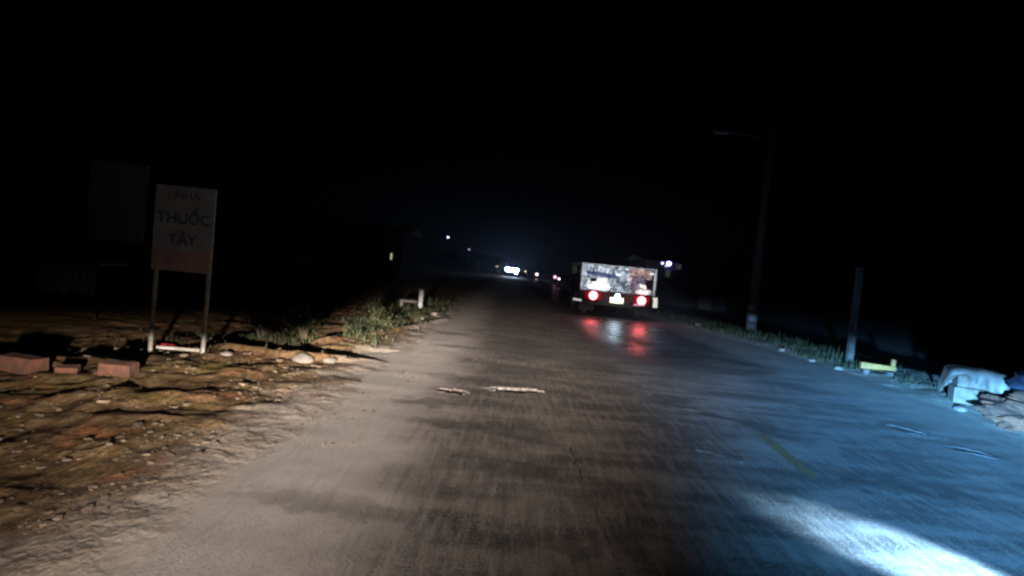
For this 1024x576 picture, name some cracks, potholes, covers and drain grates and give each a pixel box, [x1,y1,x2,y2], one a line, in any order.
crack [570,446,584,481]
